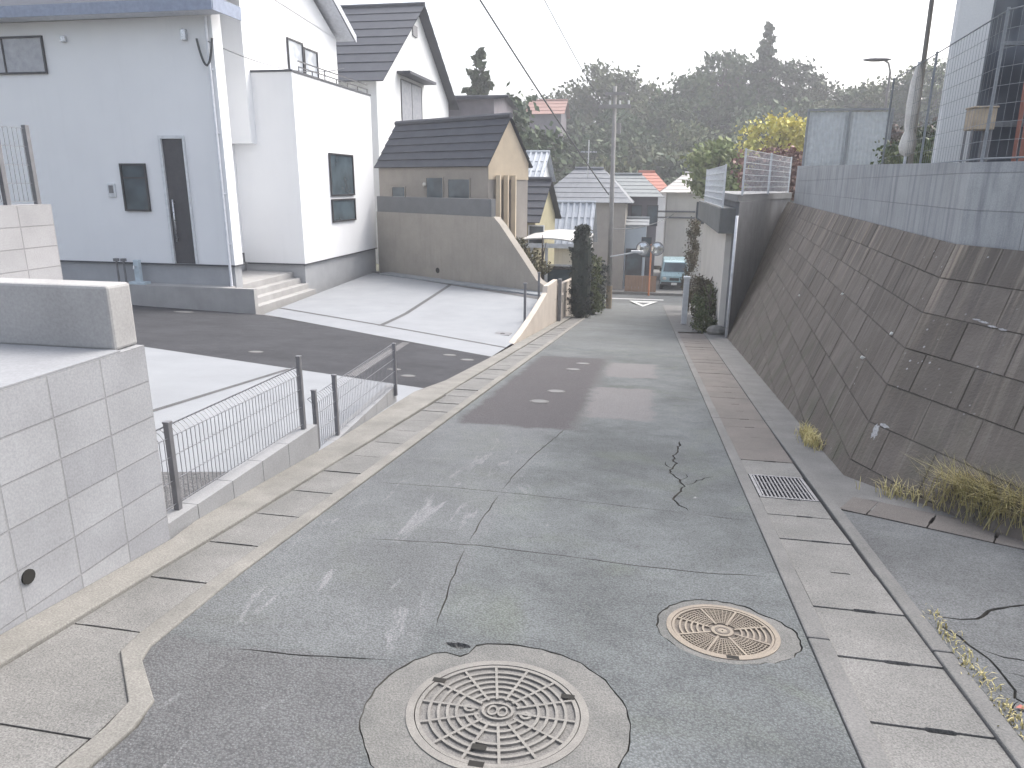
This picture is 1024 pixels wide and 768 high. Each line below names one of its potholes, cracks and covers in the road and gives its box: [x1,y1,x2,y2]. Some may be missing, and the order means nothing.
manhole cover [359,643,631,768]
crack [931,604,1024,720]
manhole cover [656,599,803,665]
drain grate [749,474,819,502]
crack [665,441,710,510]
